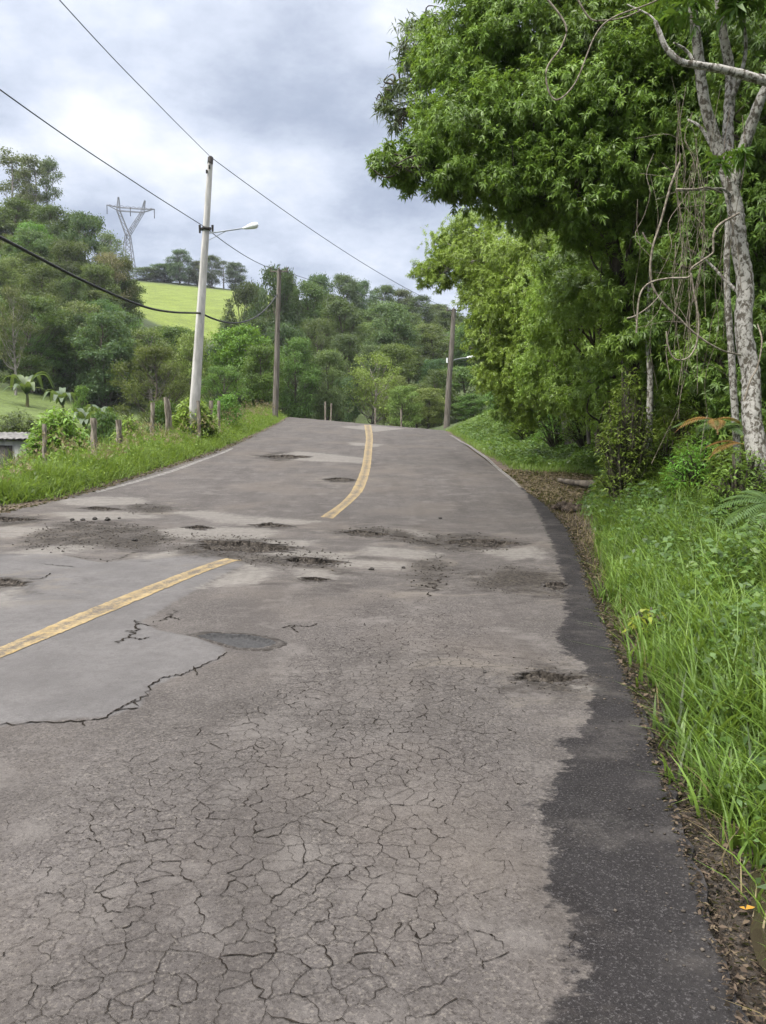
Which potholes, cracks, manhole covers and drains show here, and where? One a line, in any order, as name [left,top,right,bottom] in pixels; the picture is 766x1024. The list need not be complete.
crack [0,590,576,1024]
pothole [276,556,352,567]
pothole [333,529,395,538]
pothole [191,539,302,555]
pothole [0,578,32,587]
pothole [437,538,532,550]
pothole [505,669,598,687]
